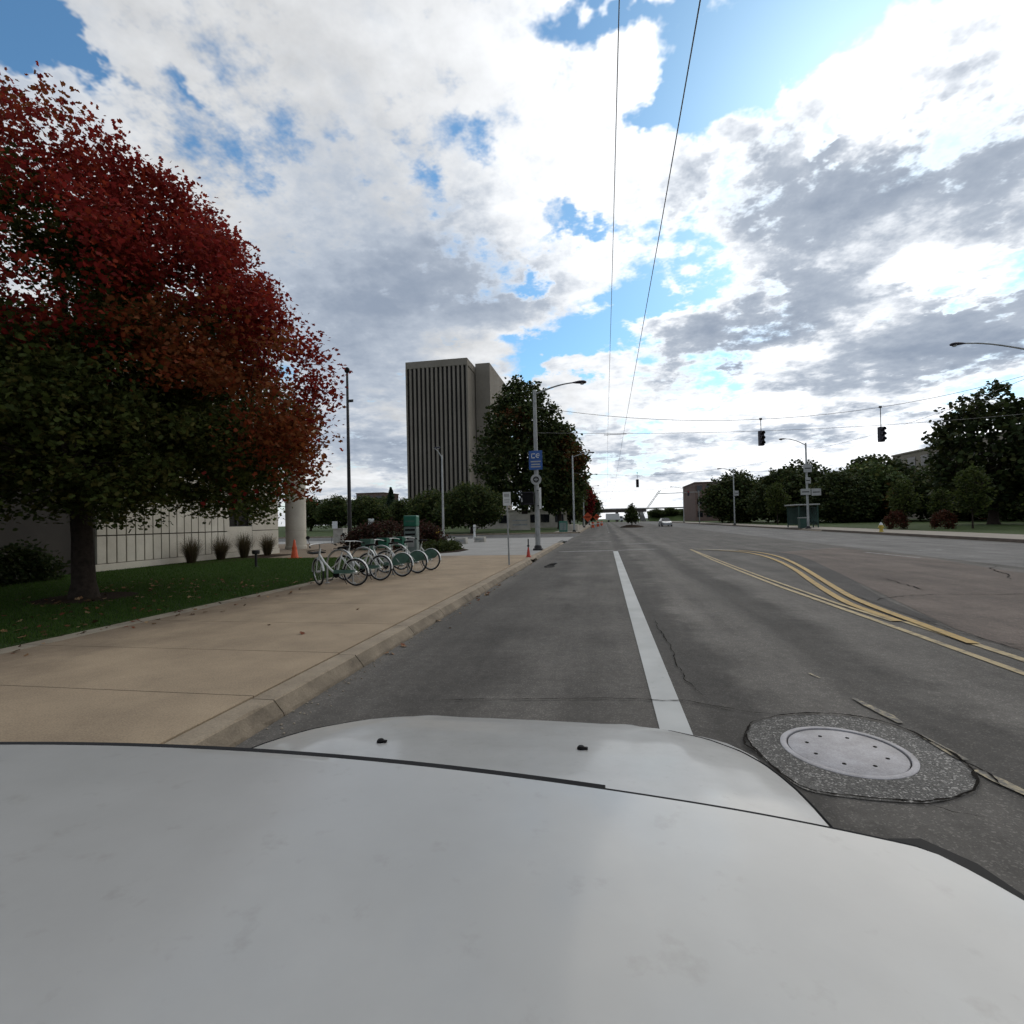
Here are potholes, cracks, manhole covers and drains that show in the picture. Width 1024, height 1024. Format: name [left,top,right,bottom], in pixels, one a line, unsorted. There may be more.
manhole cover [780,726,920,780]
